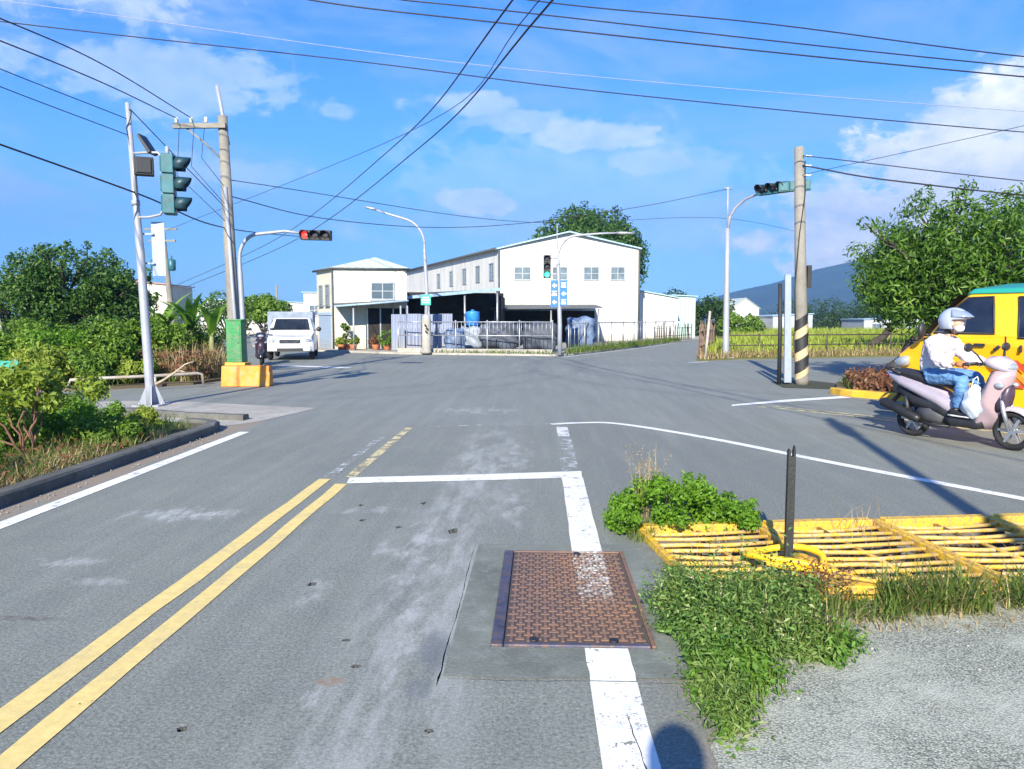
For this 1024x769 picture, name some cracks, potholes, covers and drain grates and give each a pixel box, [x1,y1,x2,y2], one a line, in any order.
crack [436,548,674,685]
manhole cover [490,550,657,649]
drain grate [988,513,1024,529]
crack [627,717,647,769]
drain grate [636,521,866,602]
